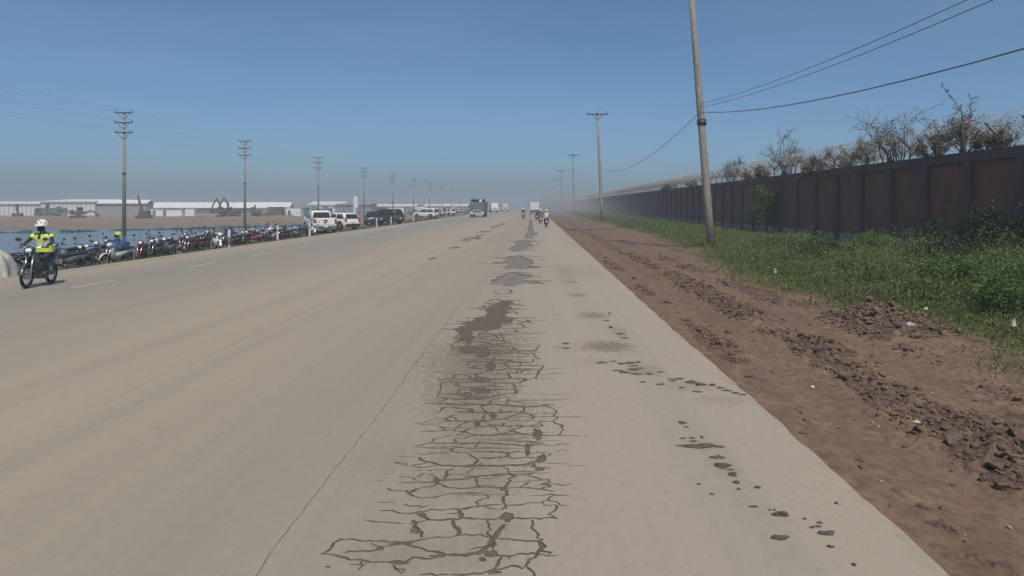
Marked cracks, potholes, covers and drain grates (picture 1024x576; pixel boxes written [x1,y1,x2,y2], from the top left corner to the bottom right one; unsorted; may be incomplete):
pothole [488,272,551,287]
pothole [474,255,540,269]
pothole [524,220,538,239]
pothole [502,240,539,252]
crack [256,289,584,576]
